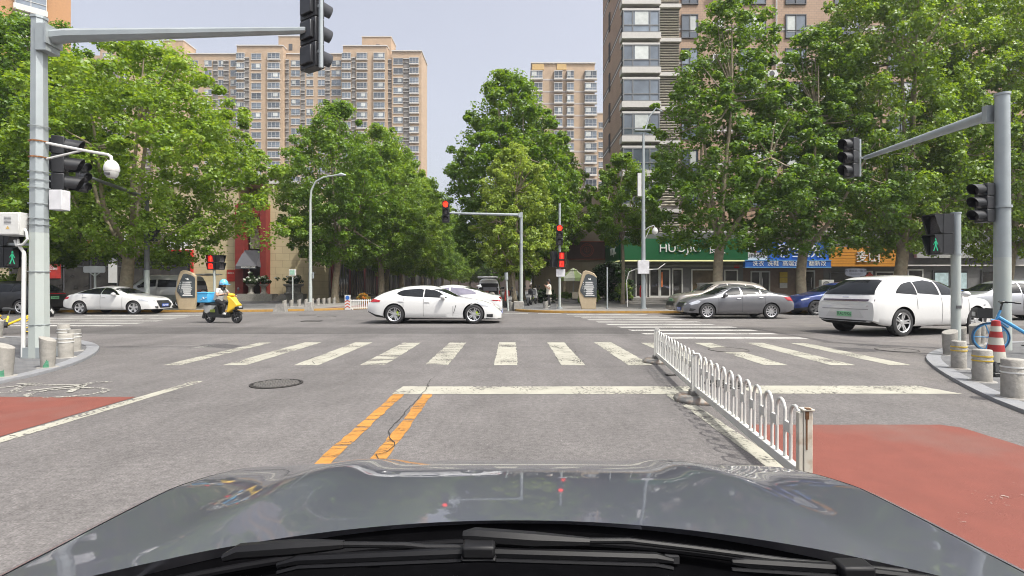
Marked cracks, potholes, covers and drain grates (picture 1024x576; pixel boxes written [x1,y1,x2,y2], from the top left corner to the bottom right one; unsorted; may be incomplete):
manhole cover [249,379,303,389]
crack [370,355,452,459]
